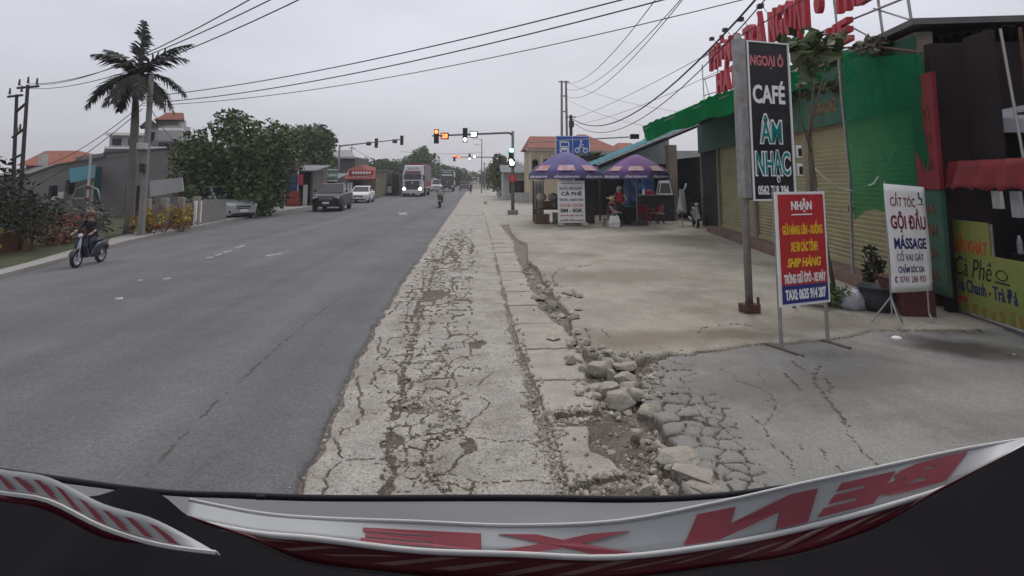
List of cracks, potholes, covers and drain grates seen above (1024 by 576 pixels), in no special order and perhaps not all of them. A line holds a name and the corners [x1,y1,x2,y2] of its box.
crack [321,229,551,495]
pothole [421,289,450,302]
crack [641,359,879,491]
pothole [551,411,687,496]
pothole [459,439,477,455]
